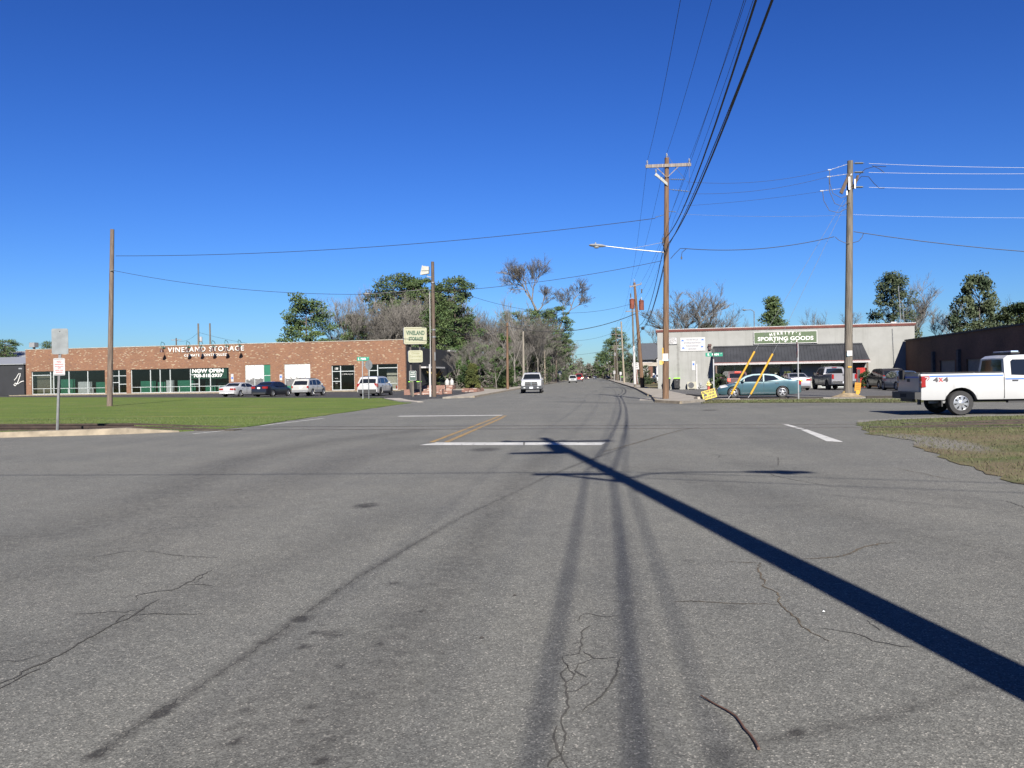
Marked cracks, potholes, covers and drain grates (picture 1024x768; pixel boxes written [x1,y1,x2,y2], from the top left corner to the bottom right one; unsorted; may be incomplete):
crack [802,542,894,559]
crack [547,613,621,768]
crack [674,562,912,647]
crack [0,551,217,688]
